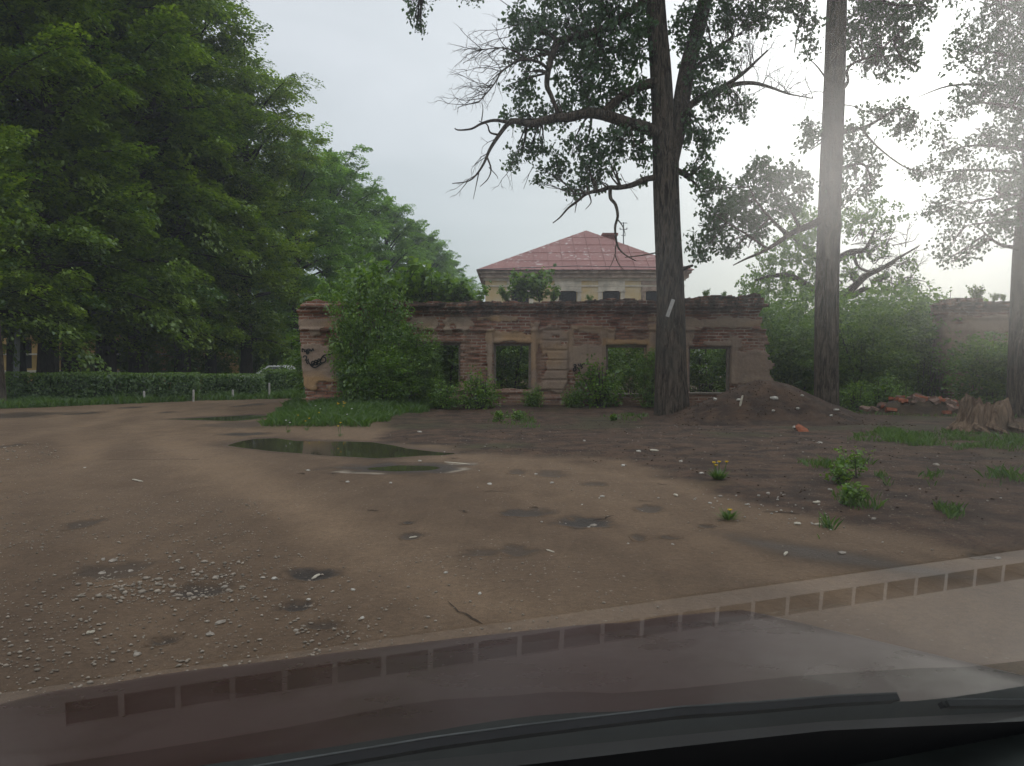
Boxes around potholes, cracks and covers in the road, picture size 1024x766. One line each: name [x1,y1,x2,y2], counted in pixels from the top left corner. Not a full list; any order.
pothole [57,518,108,532]
pothole [398,531,424,541]
pothole [632,504,665,514]
pothole [280,598,319,613]
pothole [160,578,247,600]
pothole [279,567,344,582]
pothole [548,515,619,529]
pothole [489,508,557,518]
pothole [144,634,182,648]
